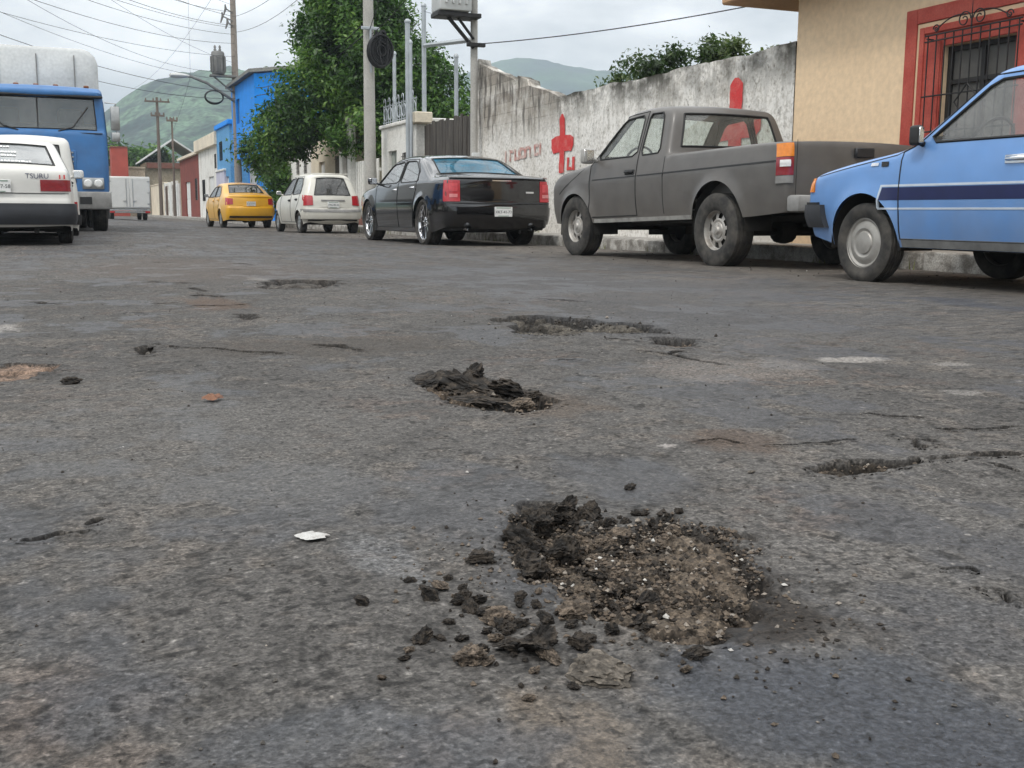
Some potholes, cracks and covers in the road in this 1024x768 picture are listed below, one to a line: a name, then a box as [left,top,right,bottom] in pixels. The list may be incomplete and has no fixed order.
pothole [123,344,169,357]
crack [15,515,112,545]
pothole [240,279,351,290]
pothole [221,313,271,322]
pothole [485,314,678,336]
pothole [800,454,978,482]
pothole [398,370,568,415]
pothole [486,497,789,667]
crack [860,412,1024,475]
crack [683,437,862,447]
pothole [642,336,708,349]
crack [146,343,289,356]
